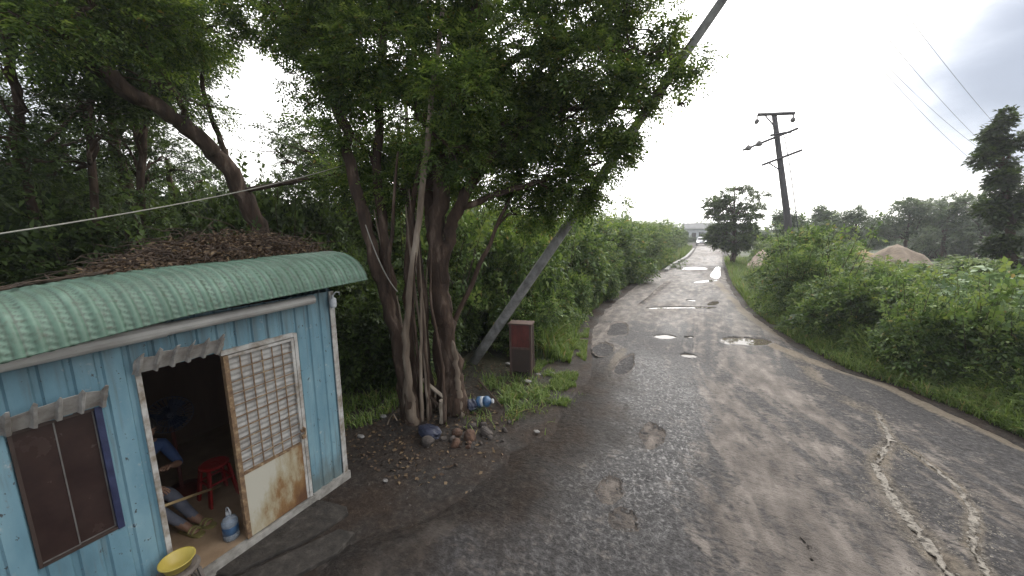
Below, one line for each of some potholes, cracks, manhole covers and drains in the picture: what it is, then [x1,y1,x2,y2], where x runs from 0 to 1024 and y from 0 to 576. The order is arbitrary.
crack [819,411,1015,576]
pothole [589,471,626,510]
pothole [634,419,669,452]
pothole [710,266,721,279]
pothole [719,336,775,348]
pothole [589,340,620,357]
pothole [601,319,630,336]
pothole [600,504,642,537]
pothole [608,352,638,378]
